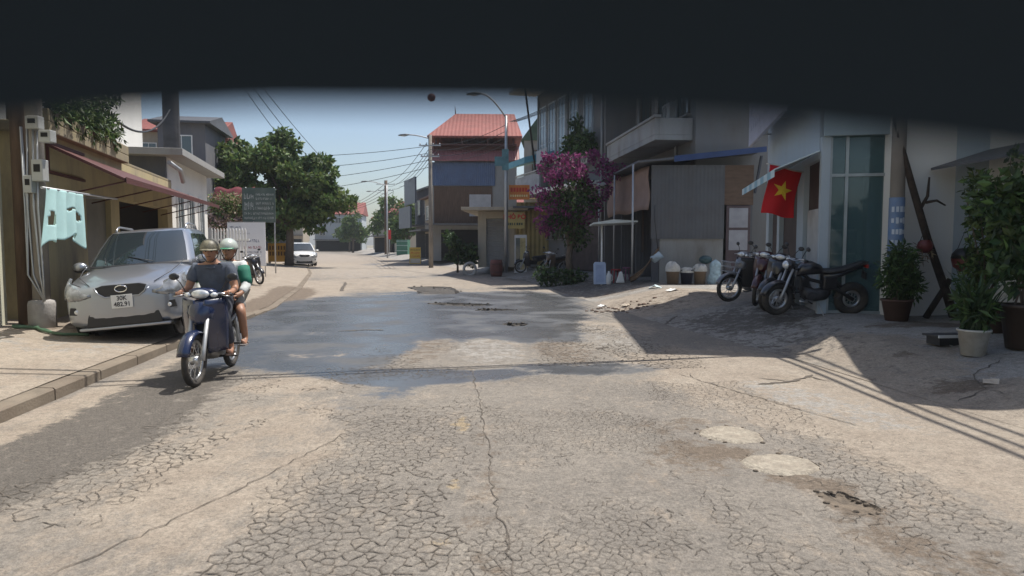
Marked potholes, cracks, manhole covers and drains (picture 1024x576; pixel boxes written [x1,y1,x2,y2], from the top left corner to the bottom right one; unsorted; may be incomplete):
crack [537,323,1024,576]
crack [0,386,266,528]
pothole [813,489,883,515]
crack [46,436,338,576]
crack [197,345,772,576]
